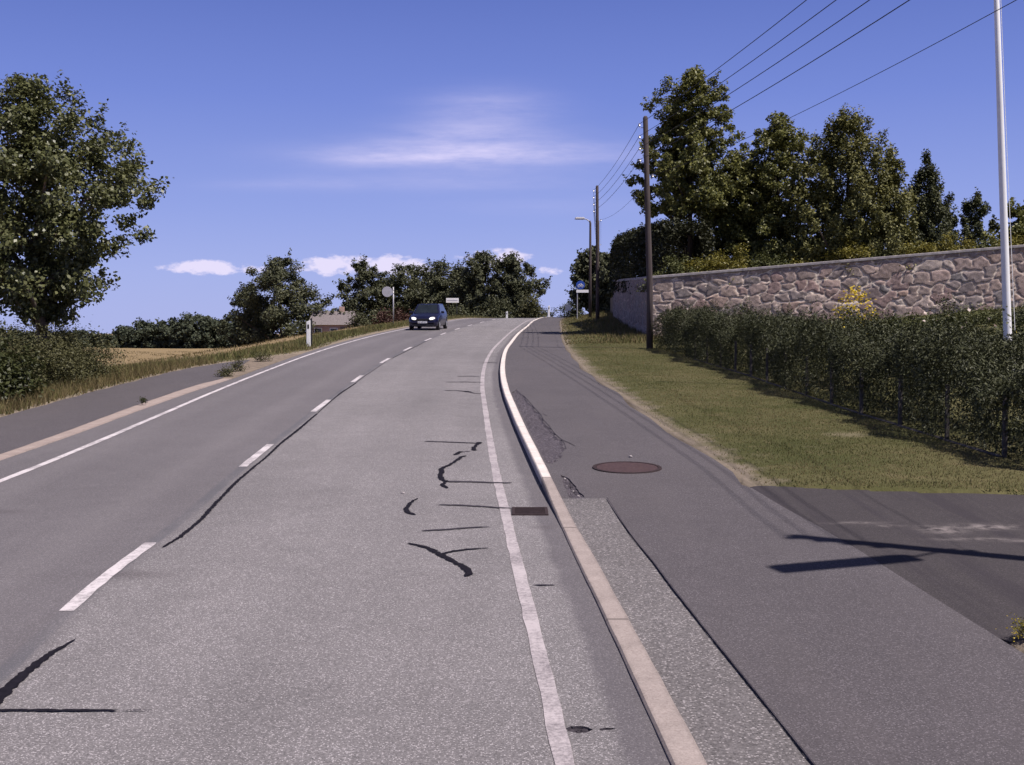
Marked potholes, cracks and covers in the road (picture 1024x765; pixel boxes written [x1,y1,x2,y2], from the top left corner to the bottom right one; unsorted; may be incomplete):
crack [430,441,512,508]
drain grate [512,507,549,516]
pothole [561,475,584,498]
manhole cover [592,461,662,474]
crack [403,498,491,576]
pothole [512,390,565,464]
crack [0,639,148,711]
